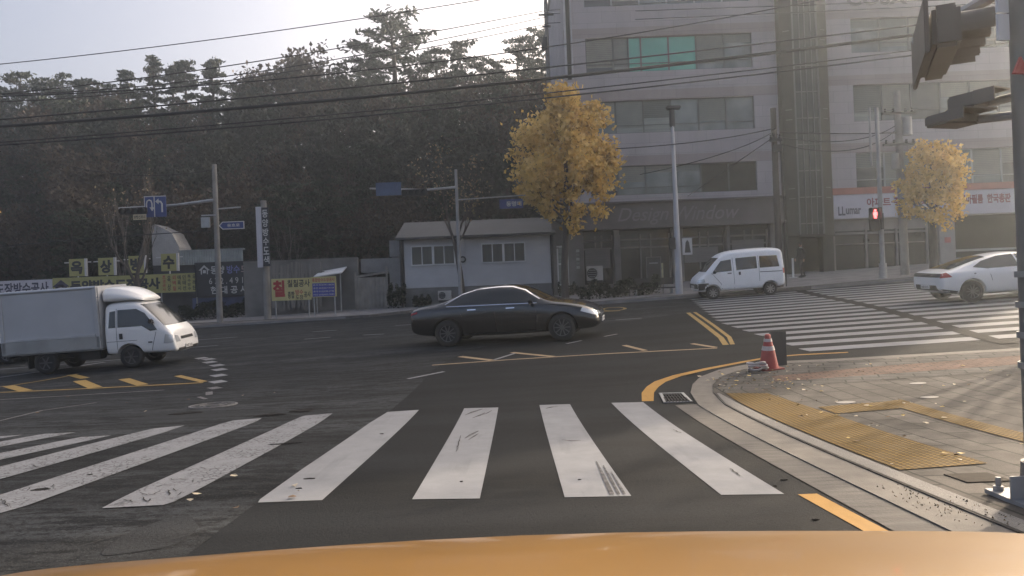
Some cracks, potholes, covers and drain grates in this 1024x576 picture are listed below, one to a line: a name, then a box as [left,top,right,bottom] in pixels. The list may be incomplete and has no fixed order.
crack [124,467,203,520]
drain grate [659,392,693,403]
